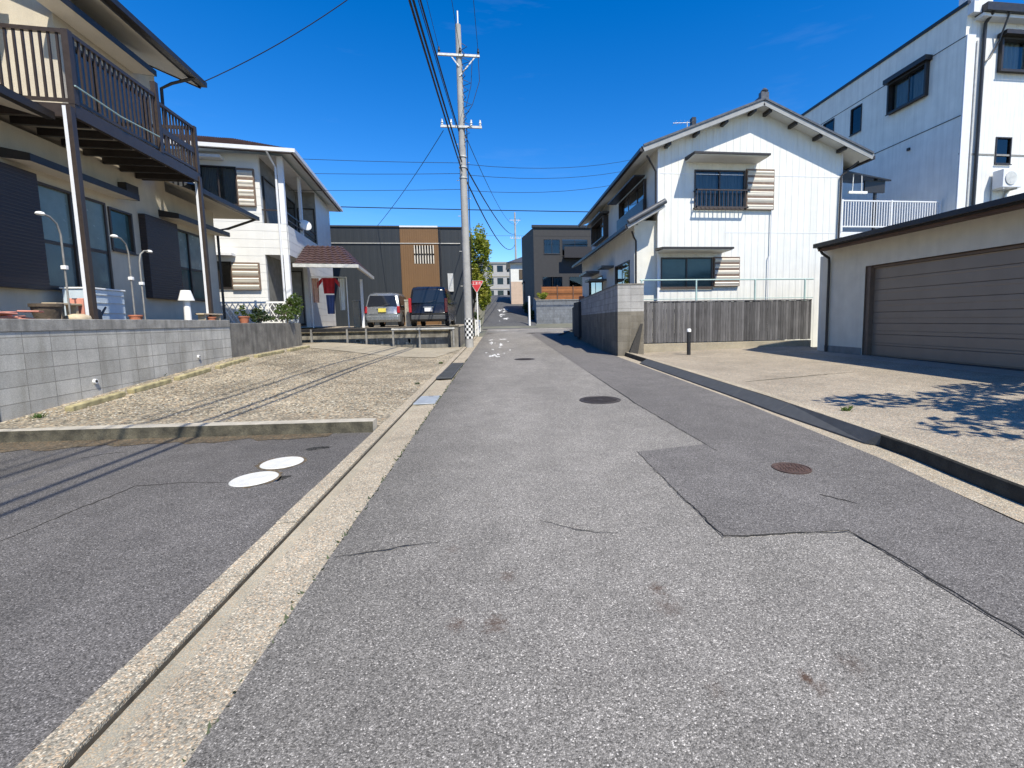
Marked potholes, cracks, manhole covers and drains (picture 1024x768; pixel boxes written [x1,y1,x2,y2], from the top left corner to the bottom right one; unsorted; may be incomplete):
manhole cover [771,462,812,475]
crack [638,452,1024,634]
drain grate [436,363,464,379]
manhole cover [579,396,621,404]
crack [336,542,436,557]
